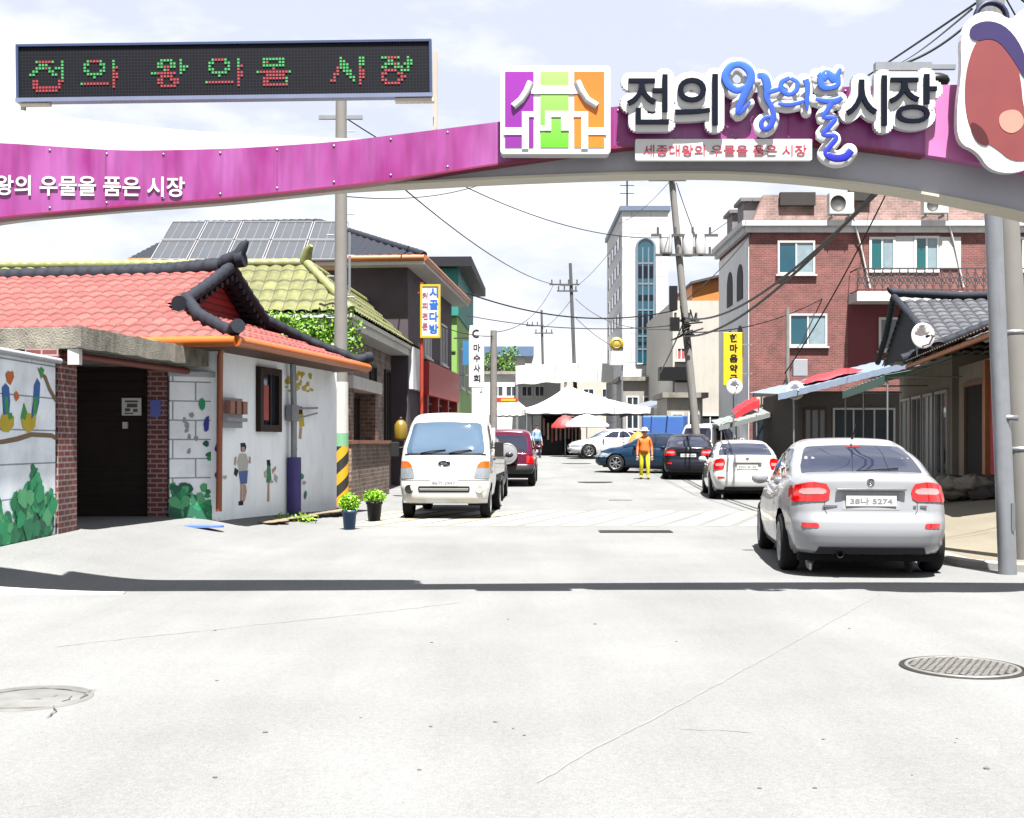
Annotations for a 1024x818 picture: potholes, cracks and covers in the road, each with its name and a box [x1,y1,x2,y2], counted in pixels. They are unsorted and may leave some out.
manhole cover [899,656,1024,680]
manhole cover [0,685,94,712]
crack [538,593,881,782]
